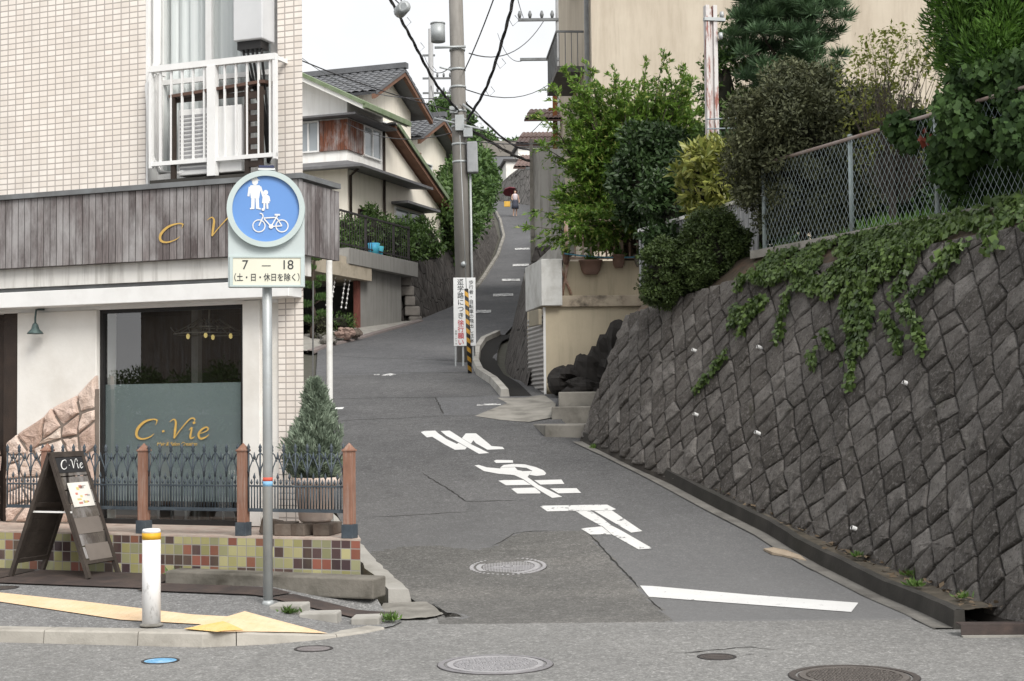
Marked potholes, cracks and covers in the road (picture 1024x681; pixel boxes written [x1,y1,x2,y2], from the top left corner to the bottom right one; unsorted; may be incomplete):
manhole cover [788,665,921,681]
manhole cover [470,558,547,575]
manhole cover [437,654,554,675]
crack [377,472,512,517]
